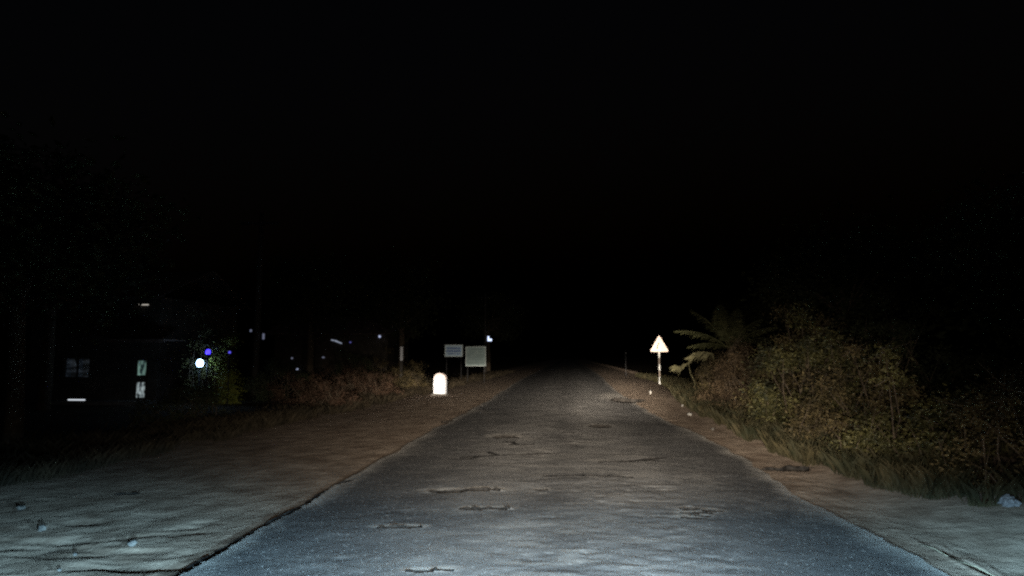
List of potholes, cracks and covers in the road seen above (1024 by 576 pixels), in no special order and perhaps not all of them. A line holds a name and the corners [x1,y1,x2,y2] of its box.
pothole [679,508,724,520]
